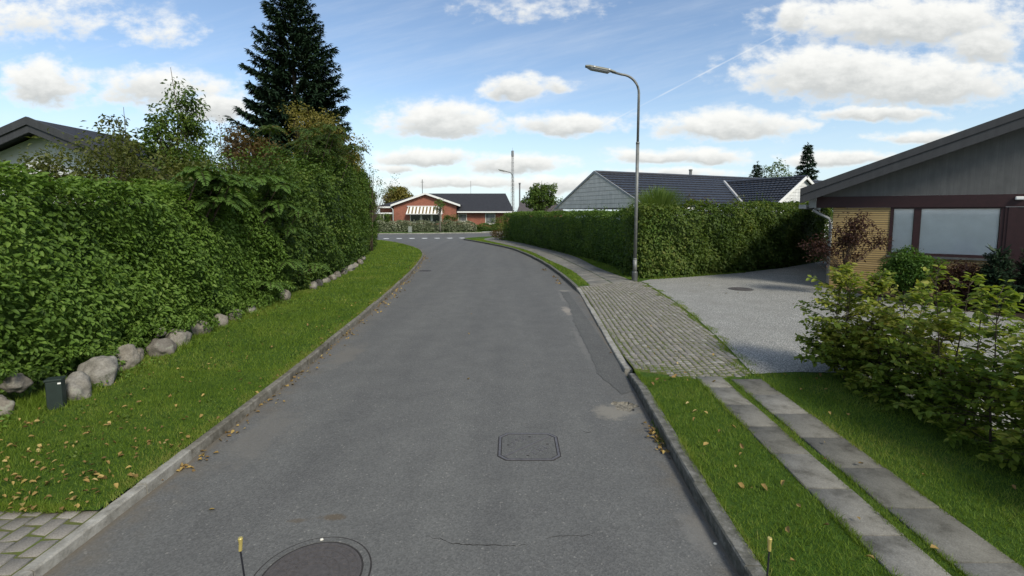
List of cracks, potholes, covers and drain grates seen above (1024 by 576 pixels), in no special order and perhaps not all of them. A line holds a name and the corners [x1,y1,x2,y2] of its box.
manhole cover [254,537,372,576]
crack [431,534,592,547]
manhole cover [497,433,561,461]
